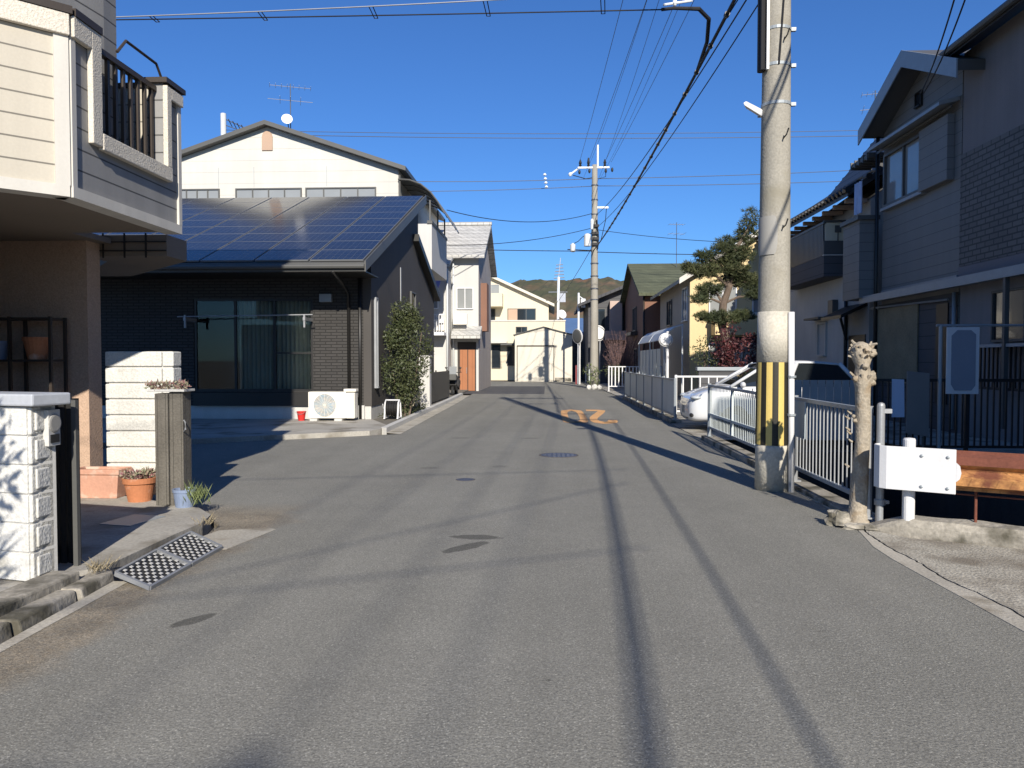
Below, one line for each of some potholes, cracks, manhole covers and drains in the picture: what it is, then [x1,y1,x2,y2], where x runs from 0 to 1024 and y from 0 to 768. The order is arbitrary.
drain grate [157,531,223,567]
drain grate [114,549,191,590]
